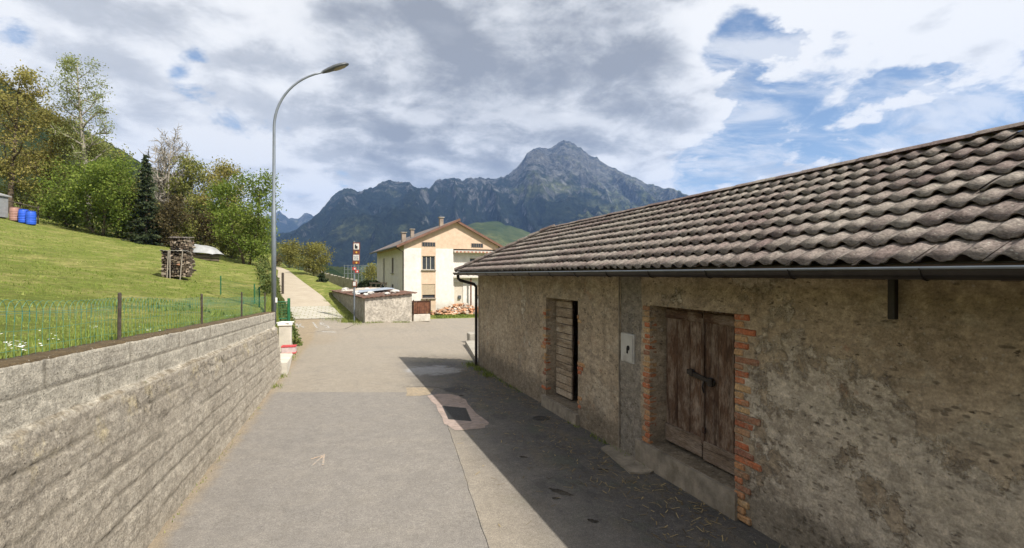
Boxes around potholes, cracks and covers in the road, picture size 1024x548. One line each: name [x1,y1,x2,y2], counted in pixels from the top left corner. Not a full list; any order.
manhole cover [443,406,471,421]
